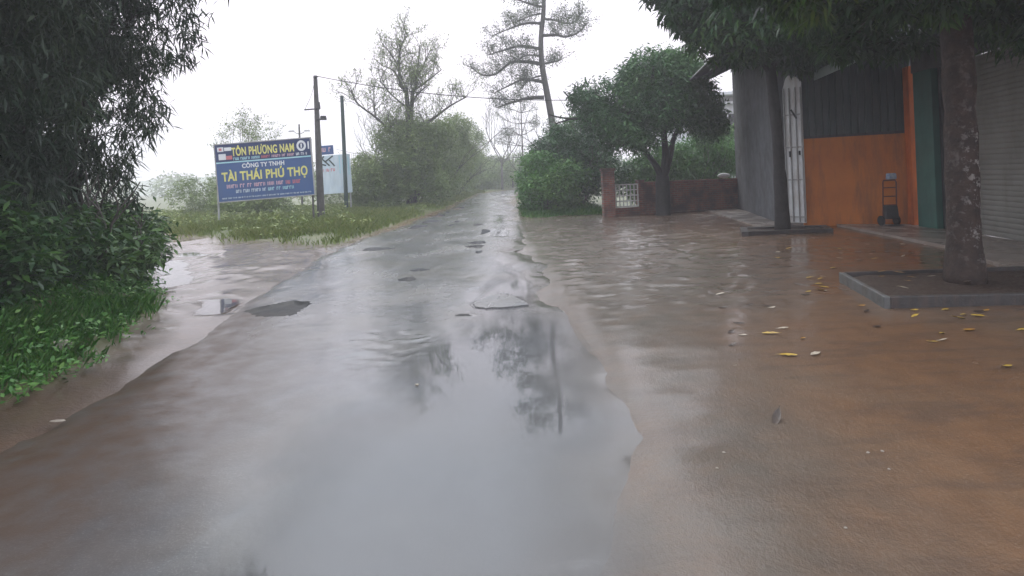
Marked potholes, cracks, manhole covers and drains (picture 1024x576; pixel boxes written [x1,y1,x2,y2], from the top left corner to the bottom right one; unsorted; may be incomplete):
pothole [244,300,312,317]
